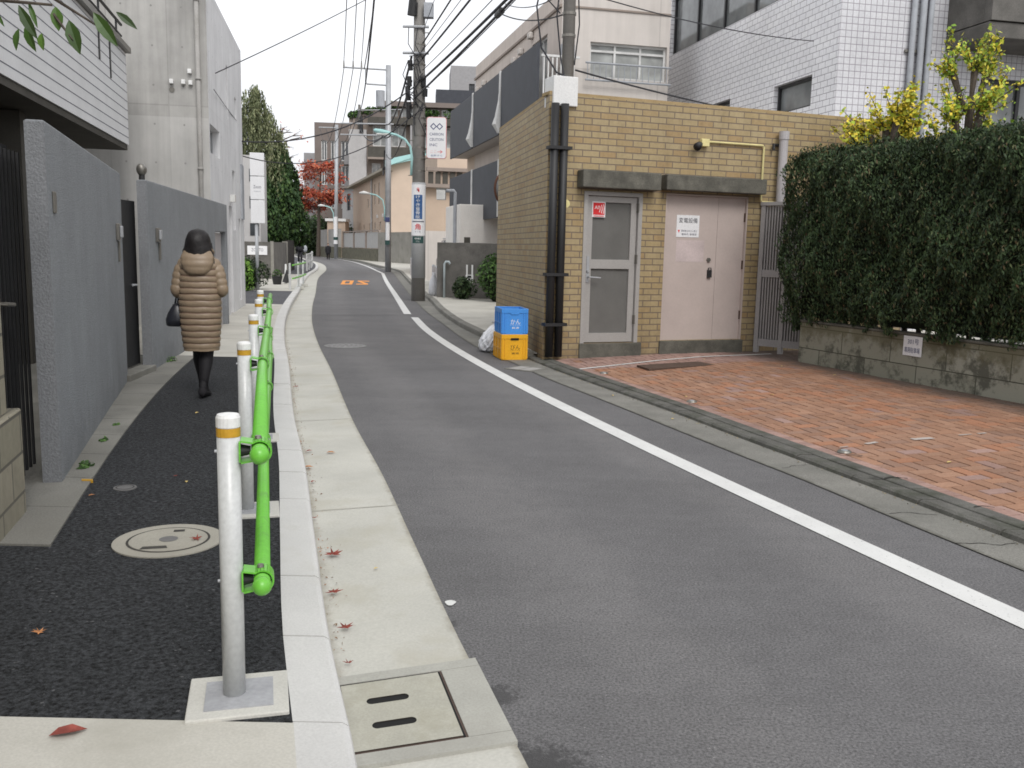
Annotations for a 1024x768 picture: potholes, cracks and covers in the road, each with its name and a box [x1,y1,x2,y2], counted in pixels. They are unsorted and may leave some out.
manhole cover [111,524,219,558]
